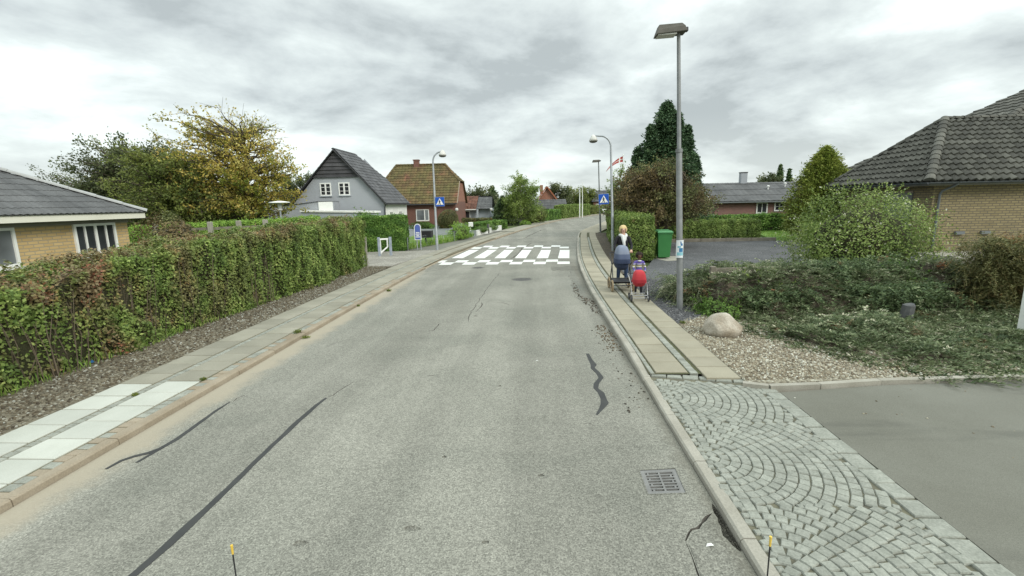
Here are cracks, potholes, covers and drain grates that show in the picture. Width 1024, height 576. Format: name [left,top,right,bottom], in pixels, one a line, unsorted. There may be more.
pothole [712,504,742,552]
drain grate [638,468,687,495]
